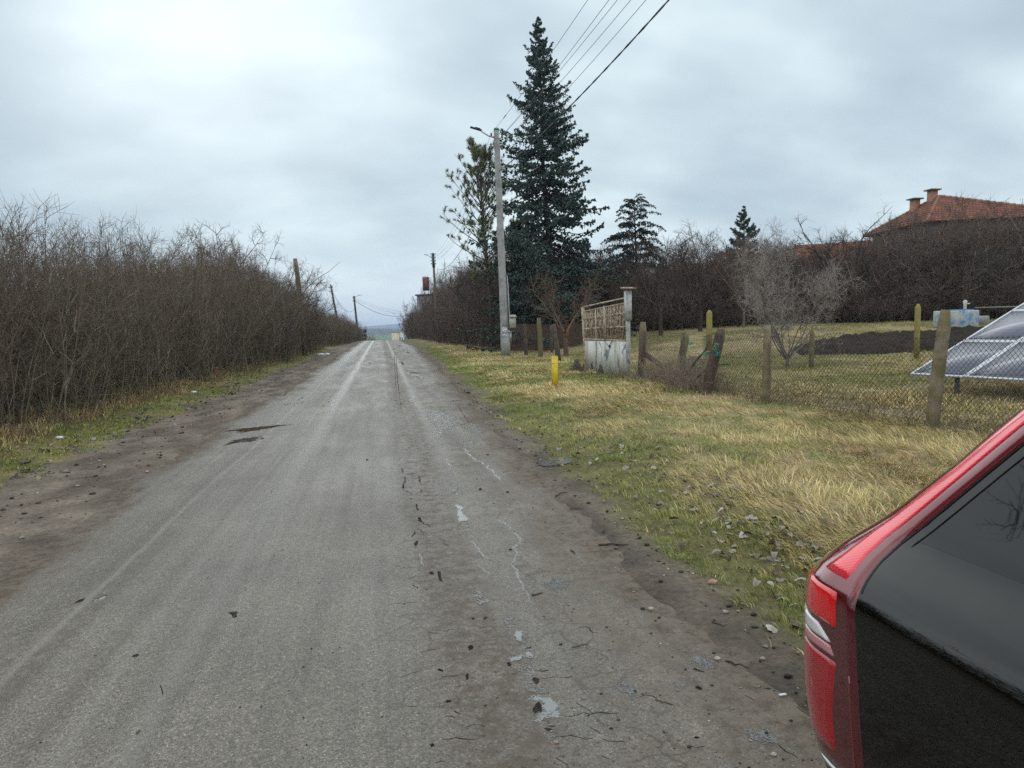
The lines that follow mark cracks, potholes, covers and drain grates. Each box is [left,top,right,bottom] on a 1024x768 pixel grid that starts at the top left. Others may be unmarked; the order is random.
crack [443,447,501,482]
crack [548,702,624,759]
pothole [223,436,263,446]
crack [472,516,540,614]
